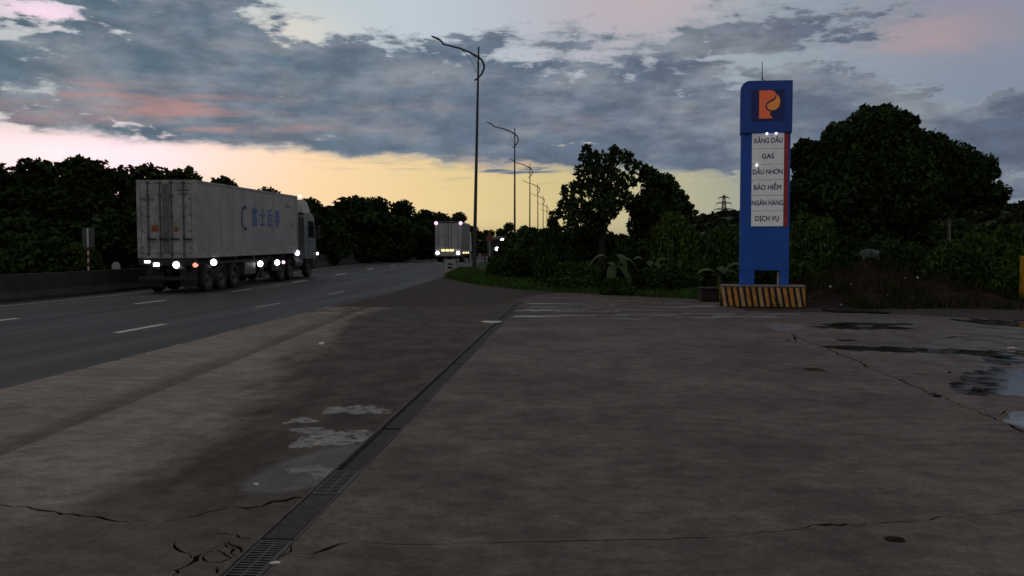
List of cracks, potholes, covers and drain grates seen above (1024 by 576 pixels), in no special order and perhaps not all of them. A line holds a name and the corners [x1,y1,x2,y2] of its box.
crack [775,333,1024,433]
drain grate [311,470,359,495]
drain grate [223,540,292,576]
crack [2,497,301,522]
crack [174,535,243,575]
crack [283,517,938,556]
